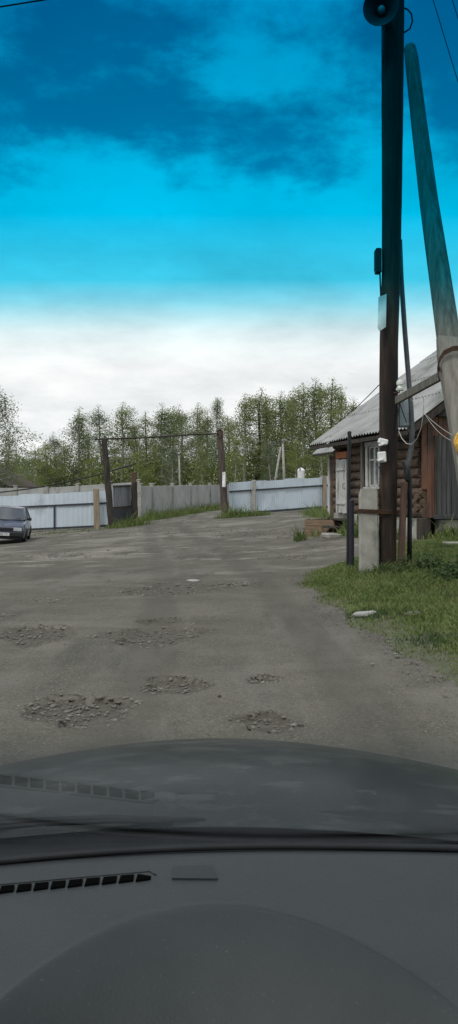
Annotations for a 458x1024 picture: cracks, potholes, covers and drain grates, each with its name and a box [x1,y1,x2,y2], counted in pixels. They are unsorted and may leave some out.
pothole [127,673,220,698]
pothole [134,617,182,625]
pothole [246,673,285,684]
pothole [82,623,222,650]
pothole [228,709,306,733]
pothole [1,686,161,731]
pothole [0,621,78,652]
pothole [105,582,242,601]
